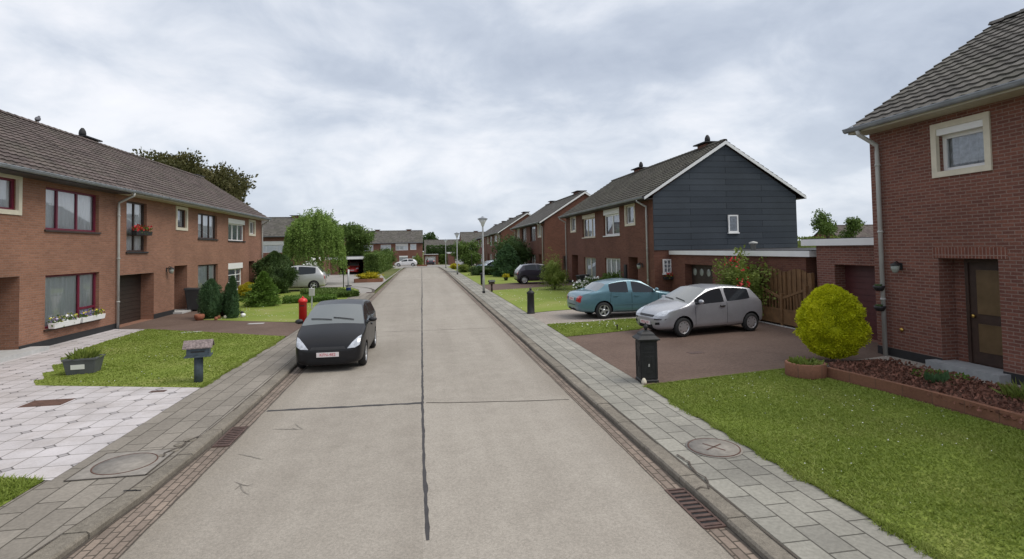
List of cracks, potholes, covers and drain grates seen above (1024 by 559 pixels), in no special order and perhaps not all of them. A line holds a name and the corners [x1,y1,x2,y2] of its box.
drain grate [211,426,248,448]
manhole cover [685,438,743,458]
drain grate [664,488,726,530]
manhole cover [65,449,172,482]
